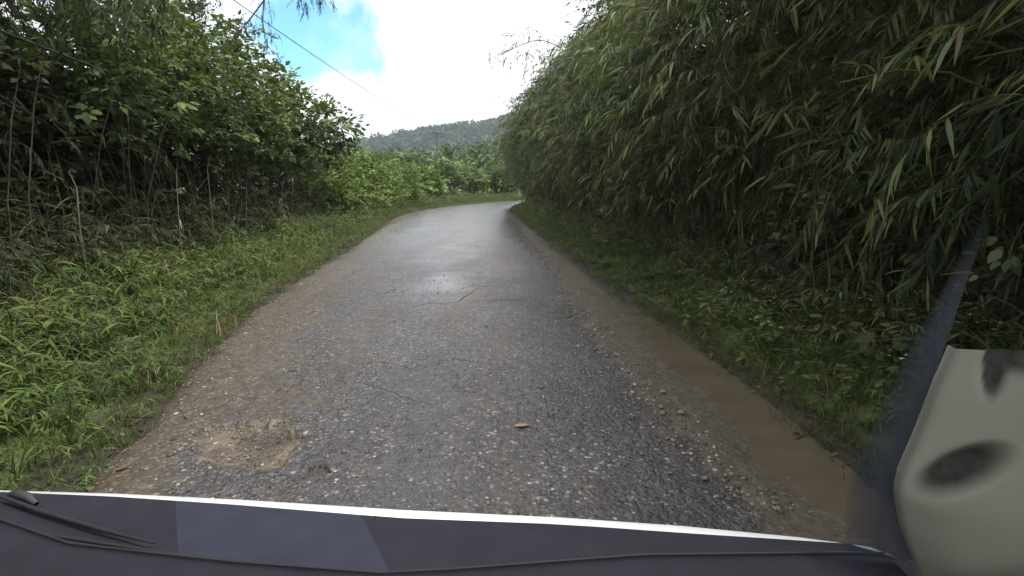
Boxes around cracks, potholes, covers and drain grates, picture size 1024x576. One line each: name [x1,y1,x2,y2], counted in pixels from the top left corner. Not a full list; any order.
pothole [187,416,303,472]
pothole [308,464,332,476]
